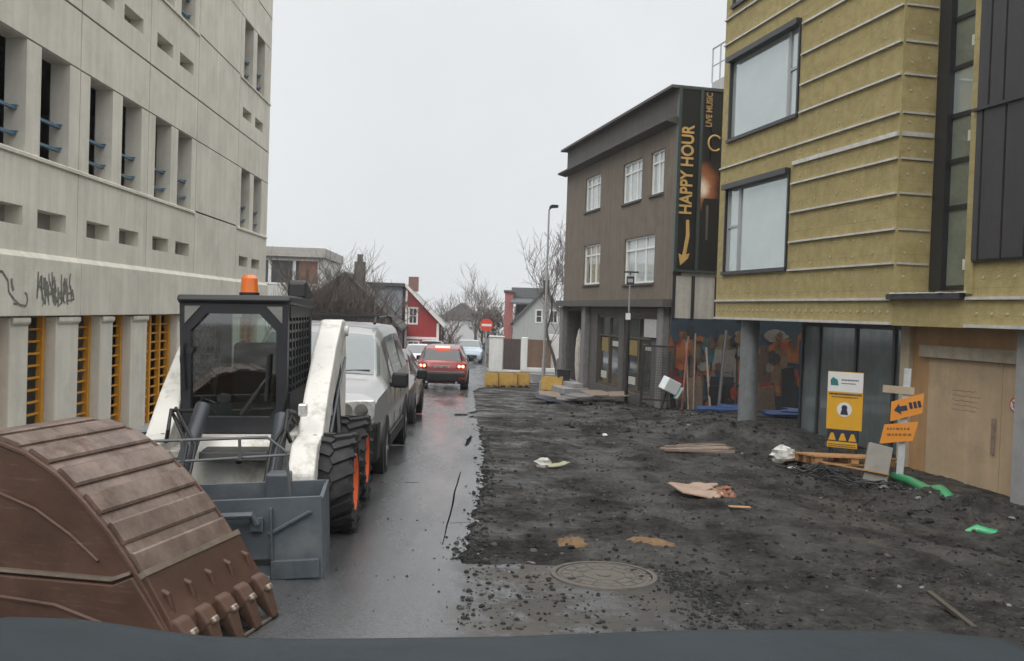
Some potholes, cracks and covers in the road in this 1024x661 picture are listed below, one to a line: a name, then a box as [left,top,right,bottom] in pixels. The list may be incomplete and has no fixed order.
crack [442,473,462,545]
manhole cover [550,561,658,591]
